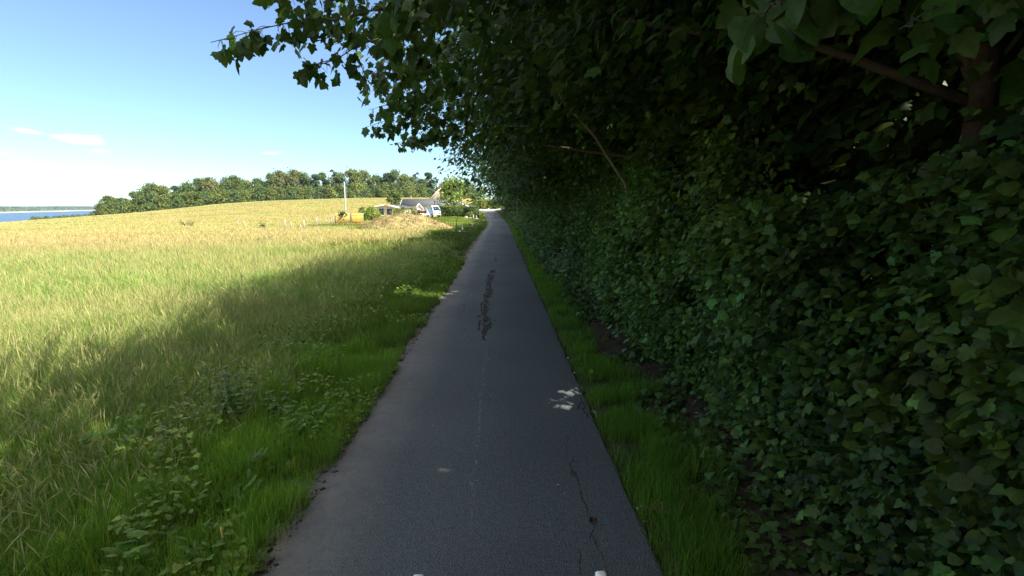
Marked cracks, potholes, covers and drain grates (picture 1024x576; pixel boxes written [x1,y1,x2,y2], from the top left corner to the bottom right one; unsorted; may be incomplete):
crack [566,438,609,576]
crack [477,257,497,340]
